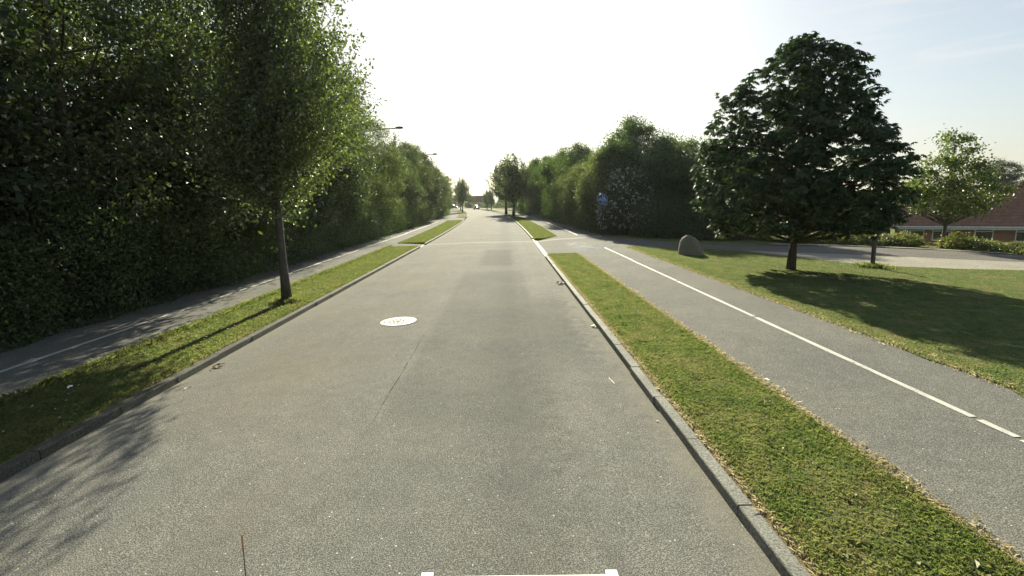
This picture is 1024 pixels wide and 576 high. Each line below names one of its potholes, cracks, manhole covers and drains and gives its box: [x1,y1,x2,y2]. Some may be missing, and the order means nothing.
manhole cover [380,317,417,326]
crack [298,275,460,549]
